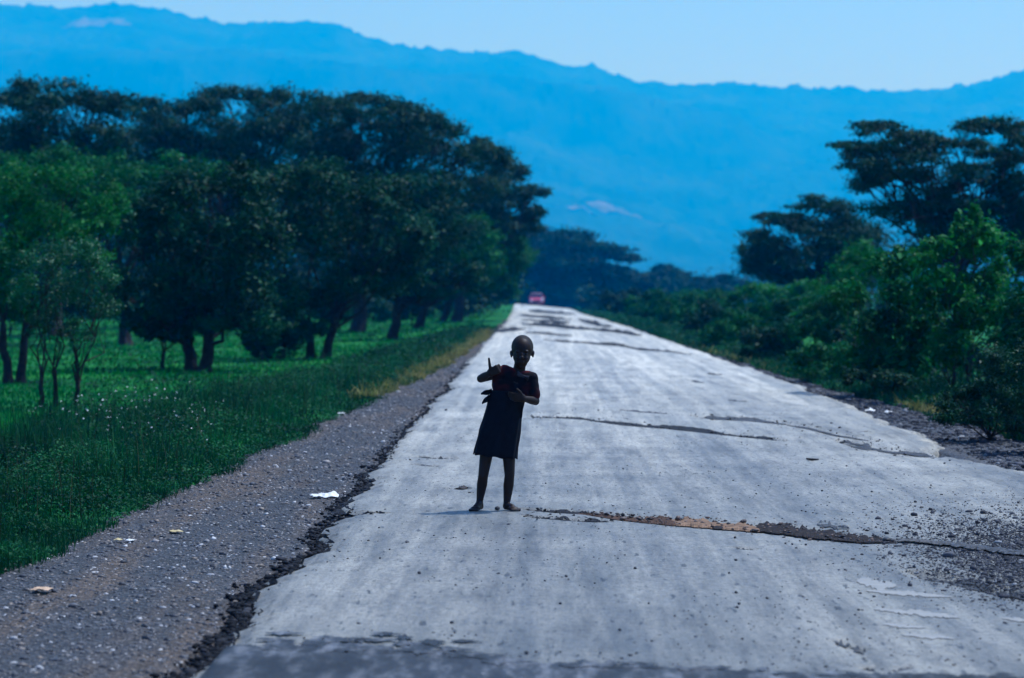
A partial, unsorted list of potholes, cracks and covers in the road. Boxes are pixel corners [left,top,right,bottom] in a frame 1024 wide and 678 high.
crack [489,319,692,355]
crack [334,400,1018,602]
